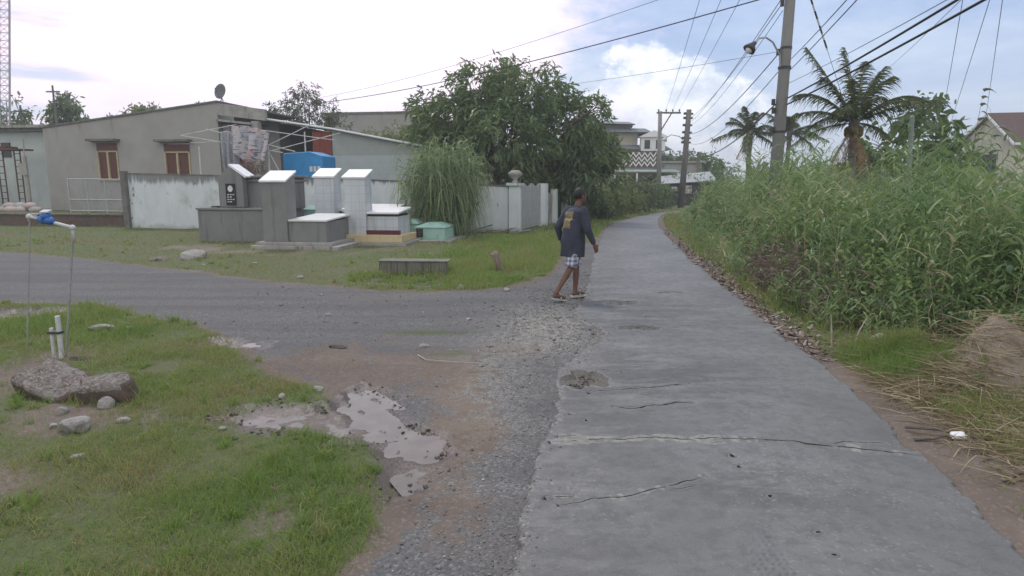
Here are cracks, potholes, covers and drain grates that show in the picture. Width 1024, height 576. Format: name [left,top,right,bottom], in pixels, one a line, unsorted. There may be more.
crack [545,433,928,507]
pothole [555,369,613,391]
crack [588,369,694,410]
